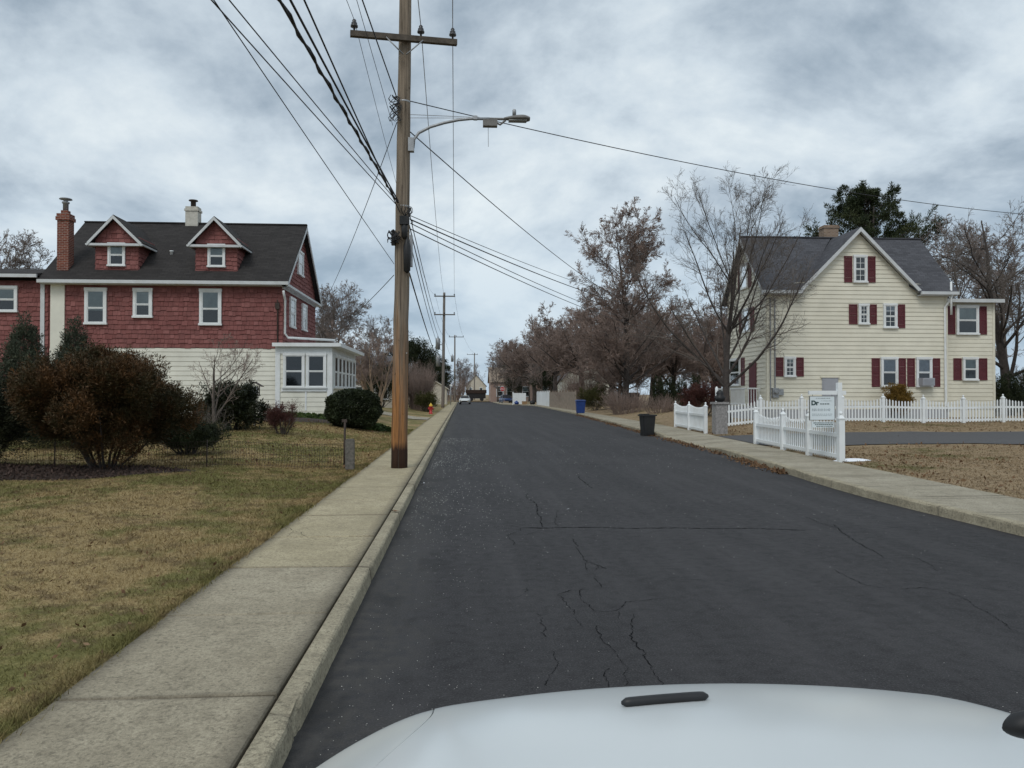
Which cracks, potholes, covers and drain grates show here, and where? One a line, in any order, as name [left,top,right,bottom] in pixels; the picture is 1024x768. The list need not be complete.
crack [526,495,664,686]
crack [836,570,1010,629]
